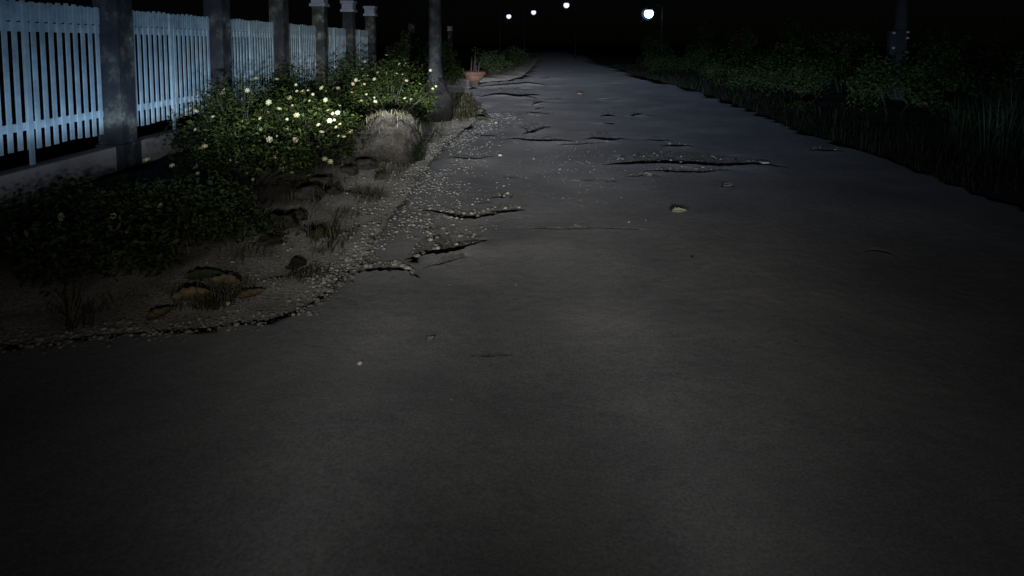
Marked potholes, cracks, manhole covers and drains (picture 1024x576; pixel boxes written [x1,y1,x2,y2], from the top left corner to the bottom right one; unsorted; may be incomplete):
crack [864,246,897,258]
crack [423,253,466,269]
